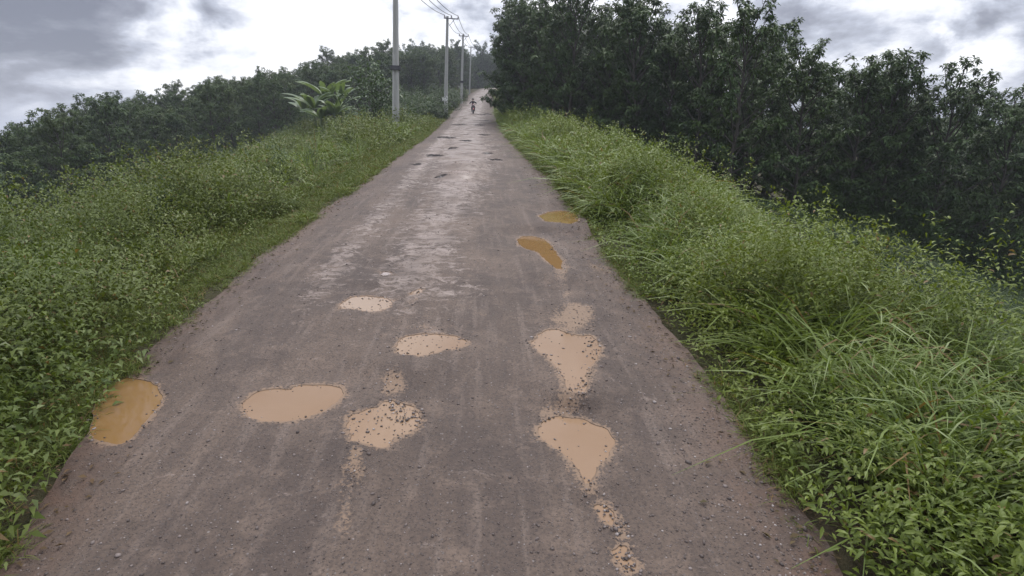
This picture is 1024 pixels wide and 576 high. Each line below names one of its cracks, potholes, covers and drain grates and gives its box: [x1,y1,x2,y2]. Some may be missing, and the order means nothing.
pothole [594,504,615,525]
pothole [611,545,636,572]
pothole [539,211,579,224]
pothole [516,236,564,270]
pothole [340,295,392,311]
pothole [346,400,422,448]
pothole [531,329,602,392]
pothole [396,333,467,356]
pothole [242,384,344,422]
pothole [90,377,163,444]
pothole [538,415,616,483]
